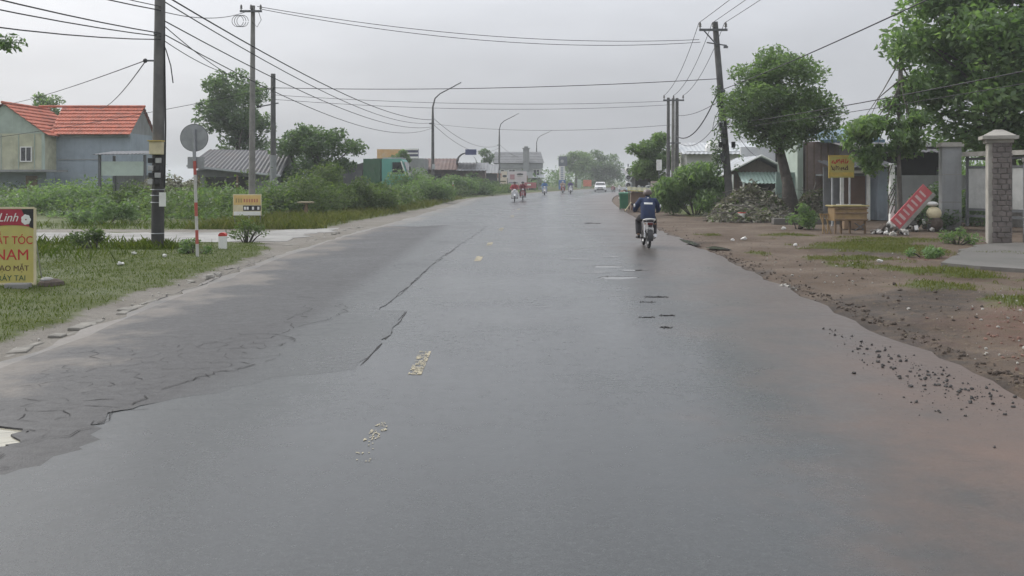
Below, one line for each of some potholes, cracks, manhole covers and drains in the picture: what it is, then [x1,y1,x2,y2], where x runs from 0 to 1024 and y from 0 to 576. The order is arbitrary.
crack [0,266,397,468]
pothole [0,426,29,447]
